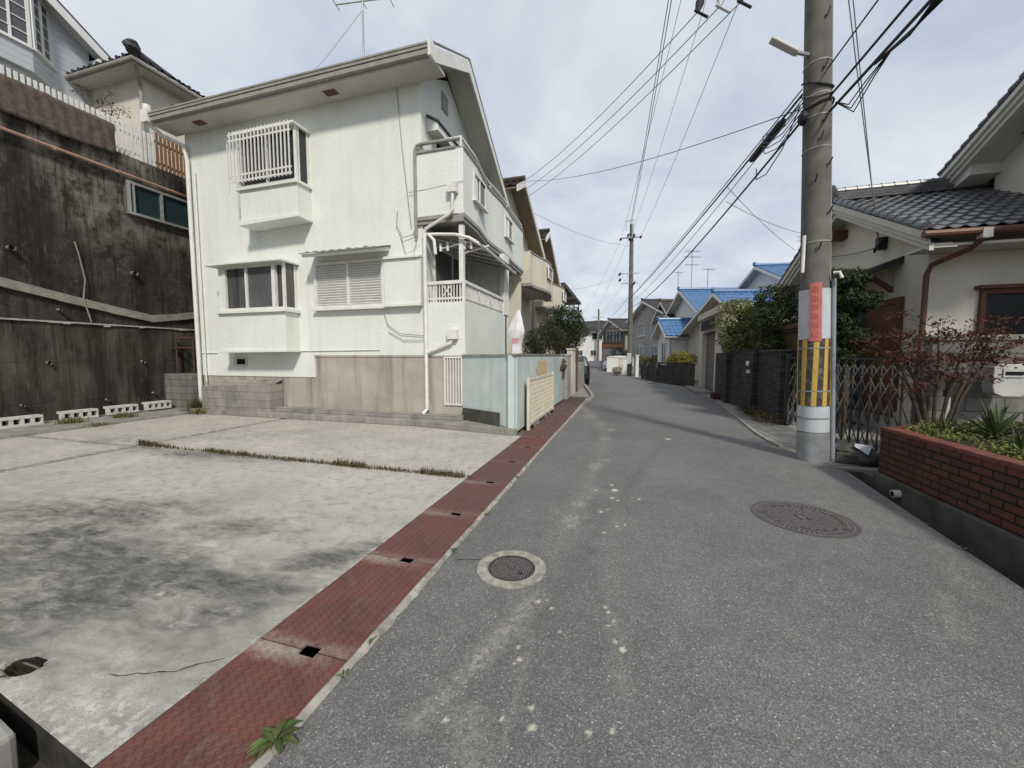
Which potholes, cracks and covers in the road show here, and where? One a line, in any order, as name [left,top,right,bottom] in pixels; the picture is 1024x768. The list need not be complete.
pothole [4,658,41,677]
manhole cover [750,501,862,538]
crack [110,658,223,676]
manhole cover [477,550,546,589]
